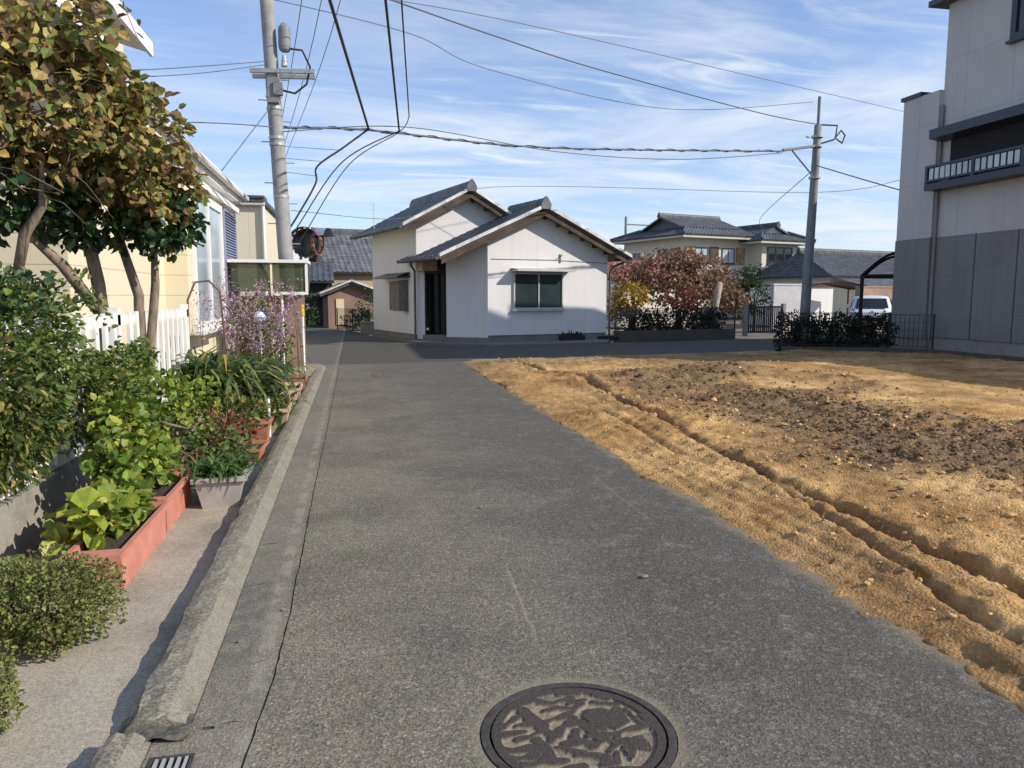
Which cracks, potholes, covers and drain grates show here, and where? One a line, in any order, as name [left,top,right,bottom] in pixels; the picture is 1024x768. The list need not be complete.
drain grate [146,752,196,768]
manhole cover [481,682,678,768]
